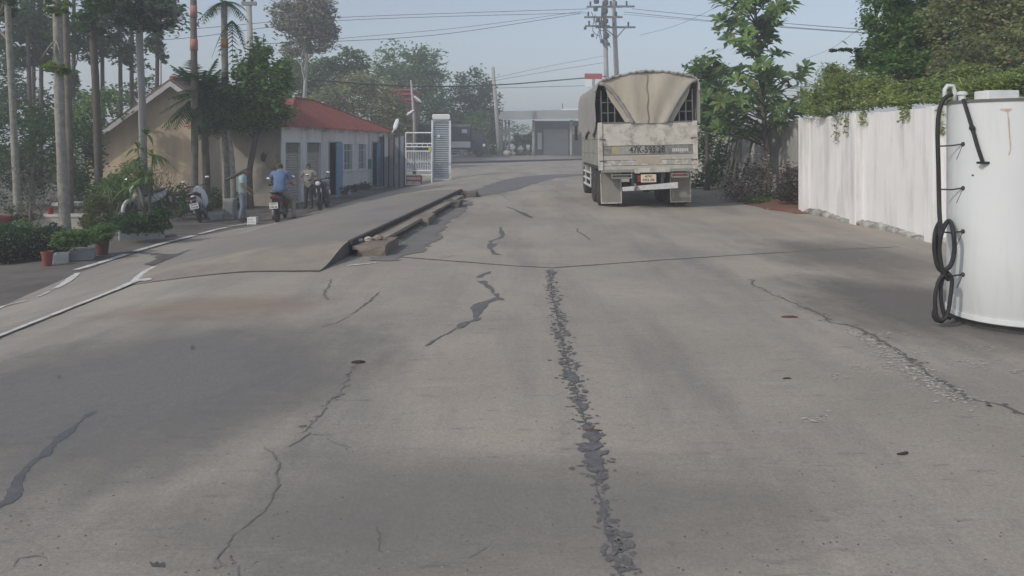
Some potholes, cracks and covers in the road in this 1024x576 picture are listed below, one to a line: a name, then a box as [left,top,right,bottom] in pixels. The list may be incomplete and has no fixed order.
crack [323,292,379,327]
crack [215,363,358,576]
crack [748,279,1024,415]
